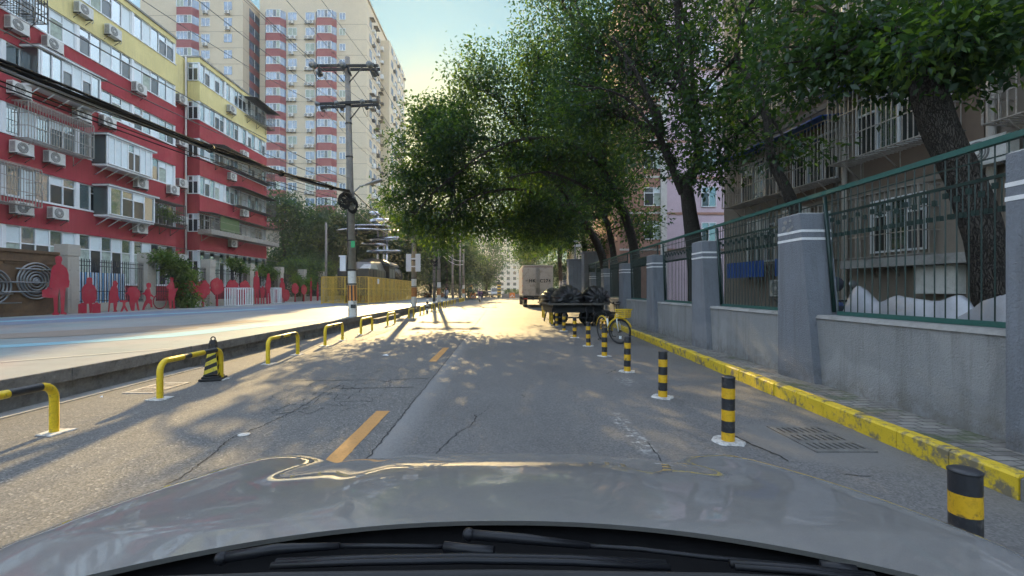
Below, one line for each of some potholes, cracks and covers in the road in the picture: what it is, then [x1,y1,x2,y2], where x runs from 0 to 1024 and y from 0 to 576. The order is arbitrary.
crack [735,436,788,461]
drain grate [766,426,878,453]
